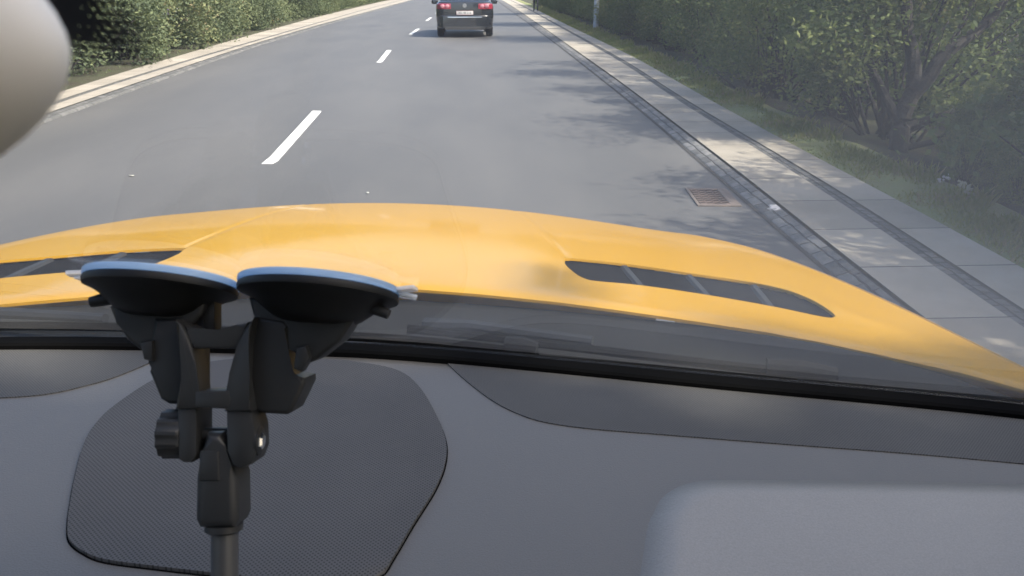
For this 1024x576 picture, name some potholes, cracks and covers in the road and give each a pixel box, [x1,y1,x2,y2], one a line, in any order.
drain grate [685,188,742,207]
